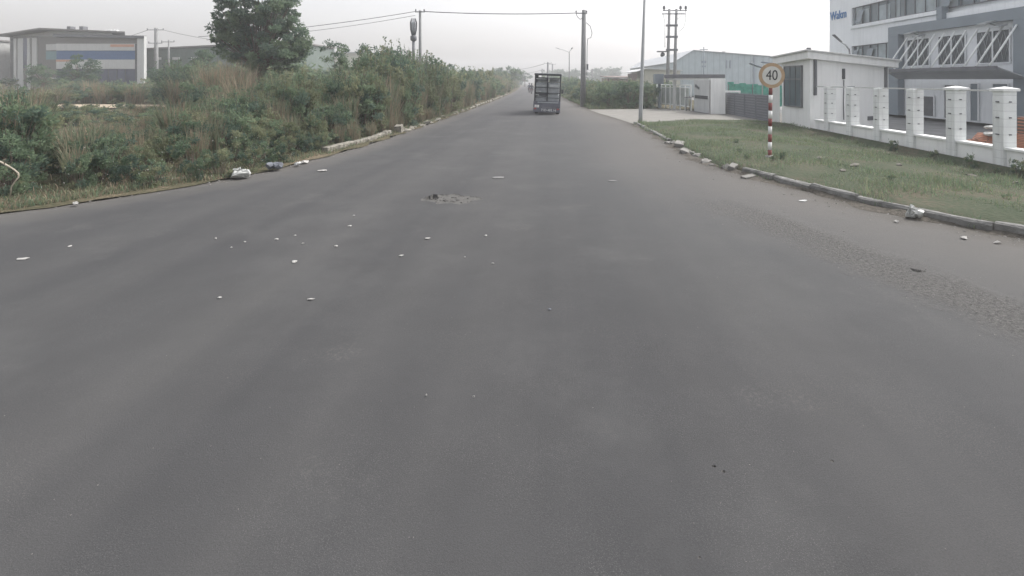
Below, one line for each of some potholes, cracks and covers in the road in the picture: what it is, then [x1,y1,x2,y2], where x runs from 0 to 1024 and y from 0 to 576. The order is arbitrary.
pothole [421,193,483,204]
